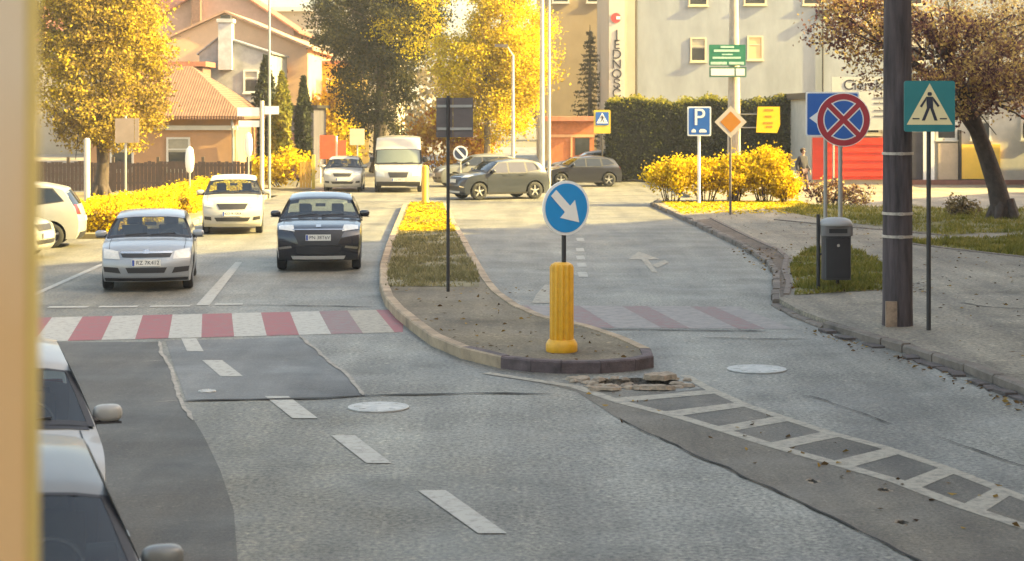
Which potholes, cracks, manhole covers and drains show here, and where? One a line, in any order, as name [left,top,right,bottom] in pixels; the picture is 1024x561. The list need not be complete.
crack [940,437,1024,466]
manhole cover [348,401,409,413]
manhole cover [727,364,787,374]
pothole [565,371,695,391]
